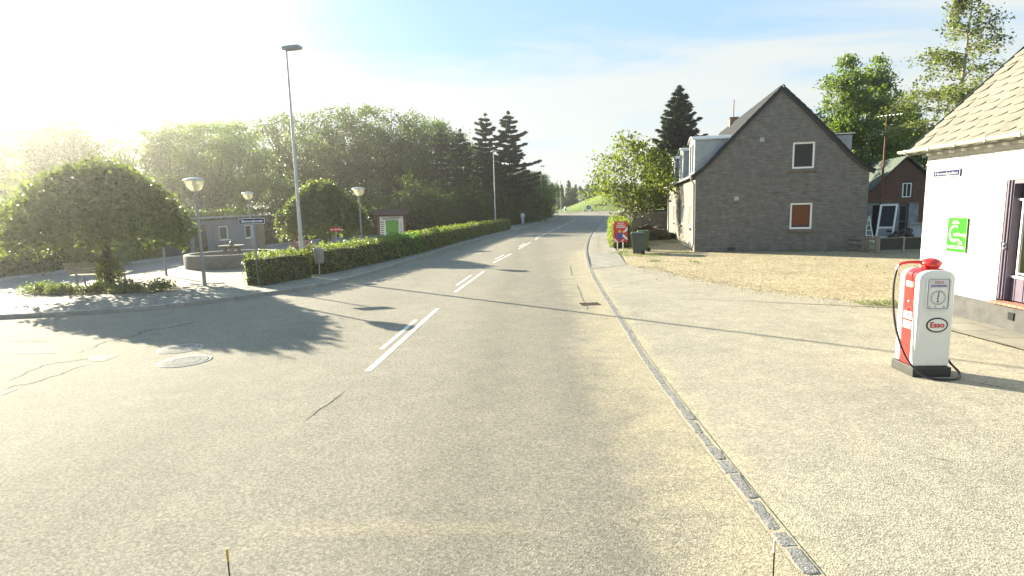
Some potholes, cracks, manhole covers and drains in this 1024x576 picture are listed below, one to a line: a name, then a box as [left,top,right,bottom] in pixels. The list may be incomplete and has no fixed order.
manhole cover [156,344,204,354]
manhole cover [157,354,213,368]
crack [4,321,199,390]
